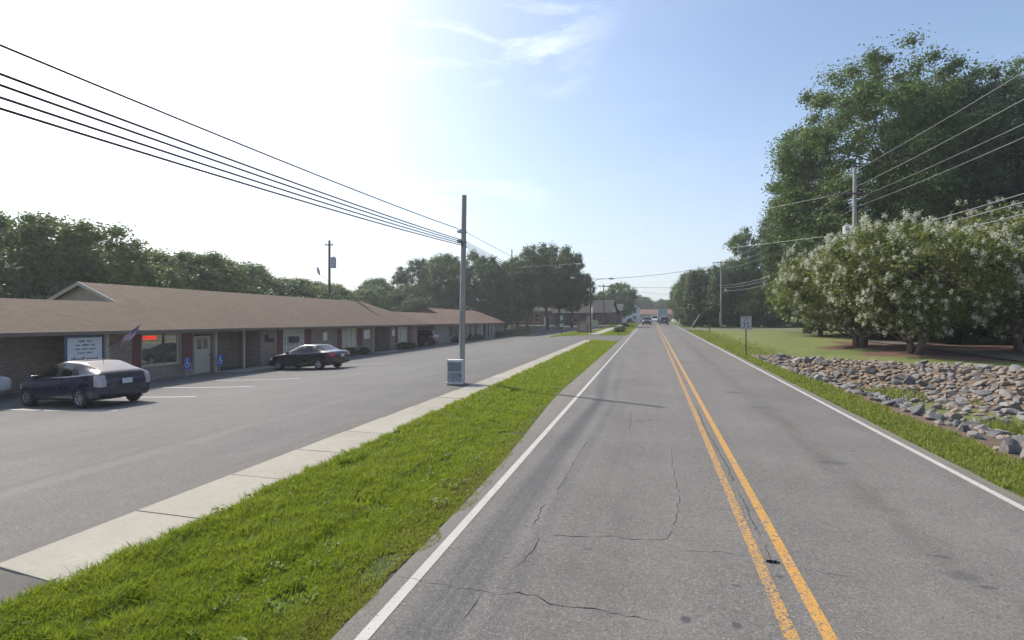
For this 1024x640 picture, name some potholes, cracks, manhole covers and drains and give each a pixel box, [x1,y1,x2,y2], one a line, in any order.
crack [397,575,653,621]
crack [517,441,867,581]
